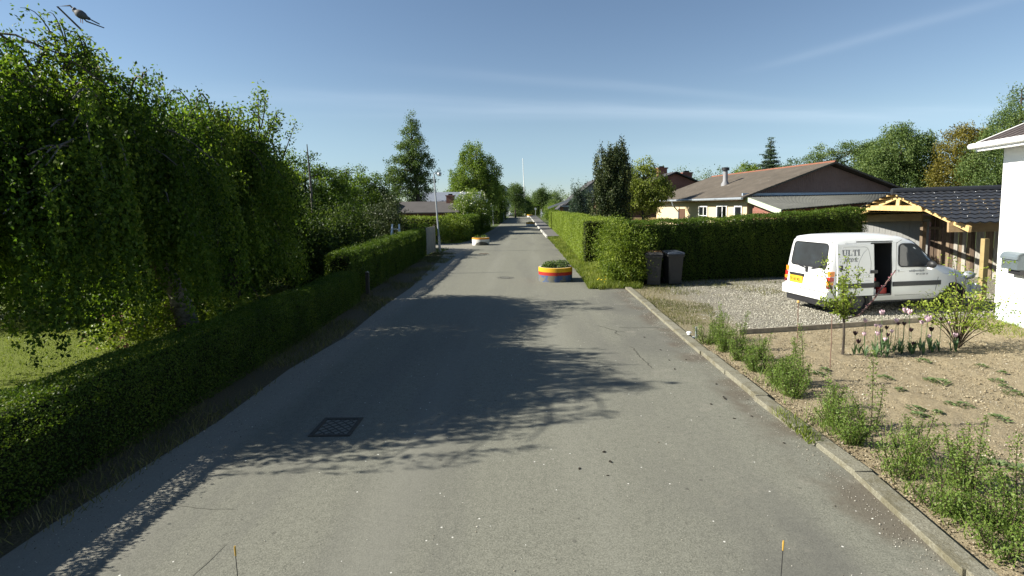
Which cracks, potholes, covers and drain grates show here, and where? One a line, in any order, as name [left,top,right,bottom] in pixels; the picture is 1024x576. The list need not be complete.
crack [600,326,658,369]
